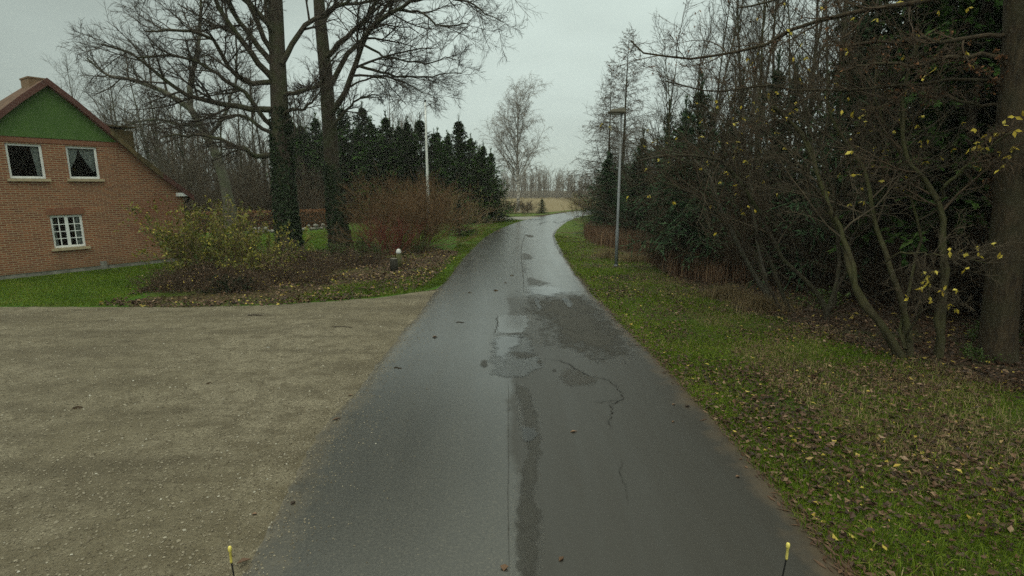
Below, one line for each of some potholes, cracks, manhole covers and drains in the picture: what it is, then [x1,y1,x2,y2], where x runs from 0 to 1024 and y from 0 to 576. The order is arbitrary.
crack [539,357,624,427]
